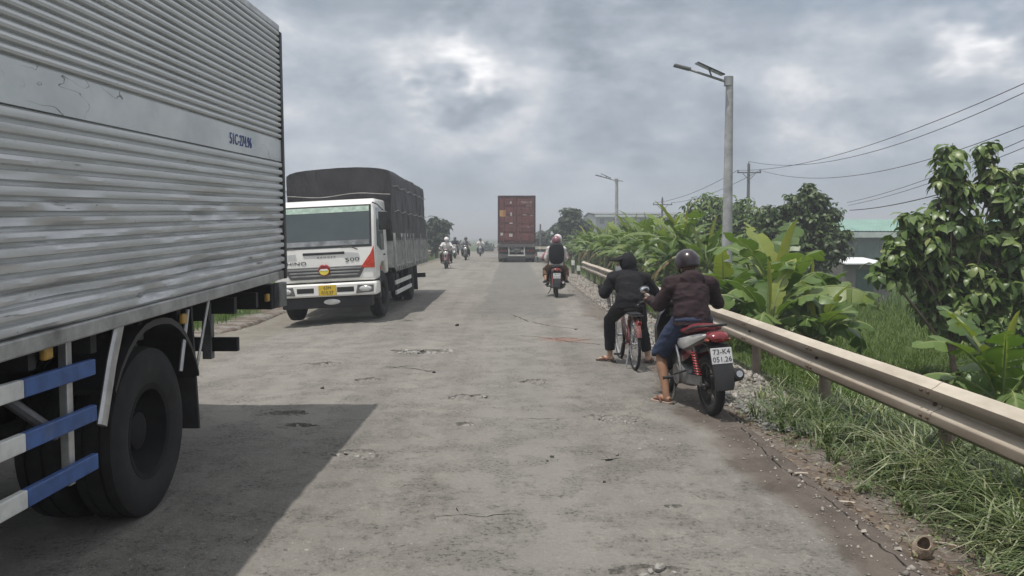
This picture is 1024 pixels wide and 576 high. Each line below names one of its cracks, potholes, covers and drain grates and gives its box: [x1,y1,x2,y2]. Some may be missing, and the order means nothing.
pothole [593,560,703,576]
pothole [442,393,496,403]
pothole [256,409,316,419]
pothole [447,420,481,429]
crack [733,427,931,576]
crack [434,507,518,522]
crack [510,314,599,345]
pothole [575,413,651,426]
pothole [513,378,553,386]
pothole [317,447,391,461]
pothole [276,422,327,430]
